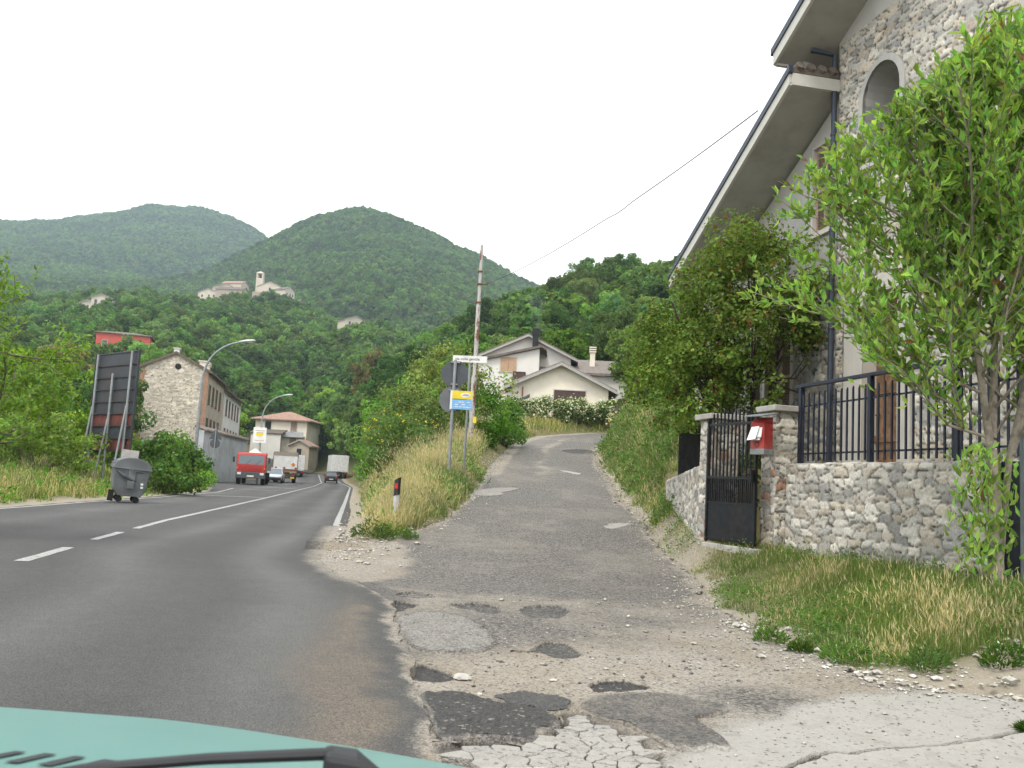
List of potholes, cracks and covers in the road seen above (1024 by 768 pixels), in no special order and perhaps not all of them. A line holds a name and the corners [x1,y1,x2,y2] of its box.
crack [433,709,675,768]
pothole [411,663,465,686]
pothole [507,640,590,661]
pothole [392,600,426,614]
pothole [512,604,575,620]
pothole [578,678,660,695]
pothole [443,602,508,615]
